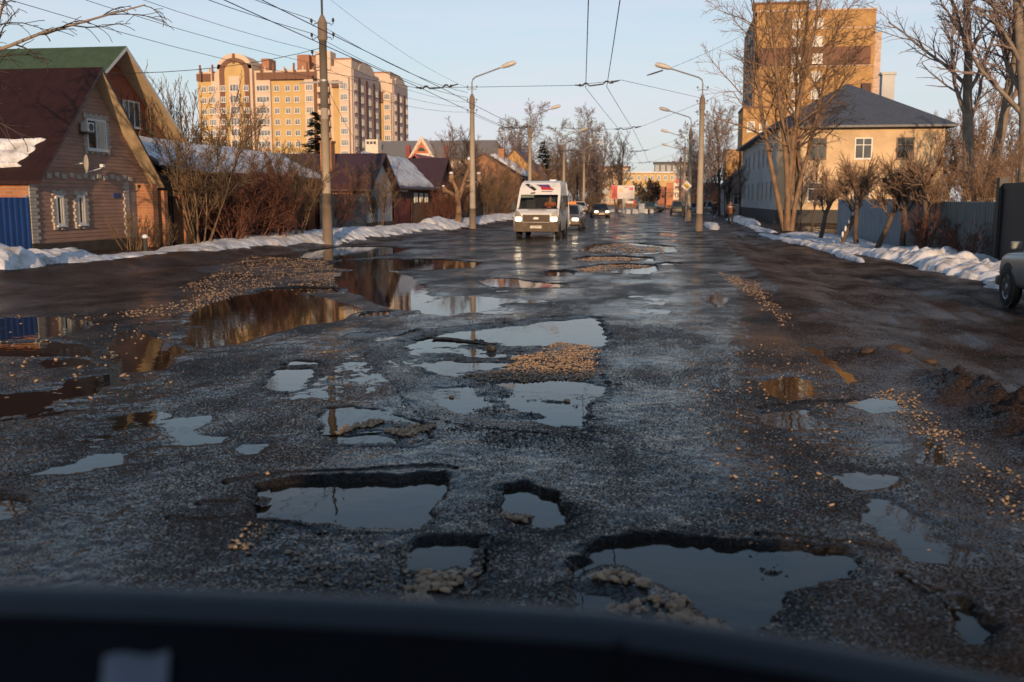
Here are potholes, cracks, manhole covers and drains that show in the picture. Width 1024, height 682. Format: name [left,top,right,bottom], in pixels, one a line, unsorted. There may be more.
pothole [478,477,590,534]
pothole [273,358,331,370]
pothole [234,468,469,536]
pothole [247,285,348,294]
pothole [249,364,326,394]
pothole [572,263,660,275]
pothole [378,529,515,602]
pothole [578,242,680,255]
pothole [540,527,887,636]
pothole [302,403,447,448]
pothole [361,314,624,441]
